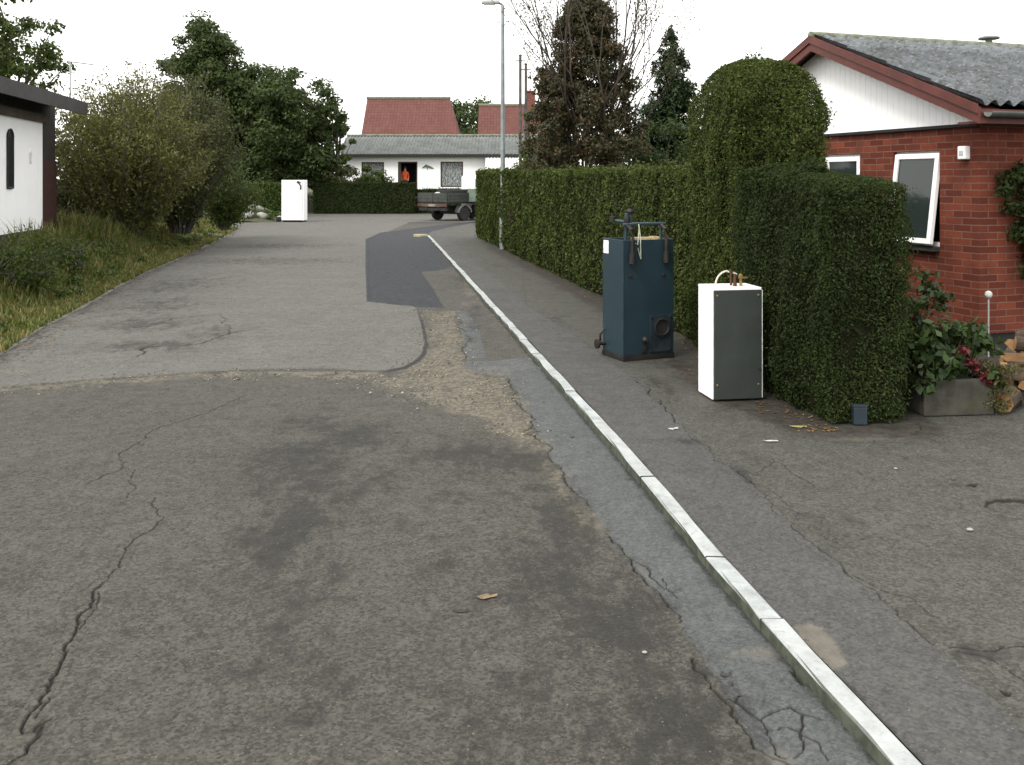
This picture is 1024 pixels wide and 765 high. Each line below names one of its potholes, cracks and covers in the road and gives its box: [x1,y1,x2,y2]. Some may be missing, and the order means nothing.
crack [0,394,254,765]
crack [124,314,254,359]
crack [600,532,691,628]
crack [500,377,600,510]
crack [681,652,841,765]
